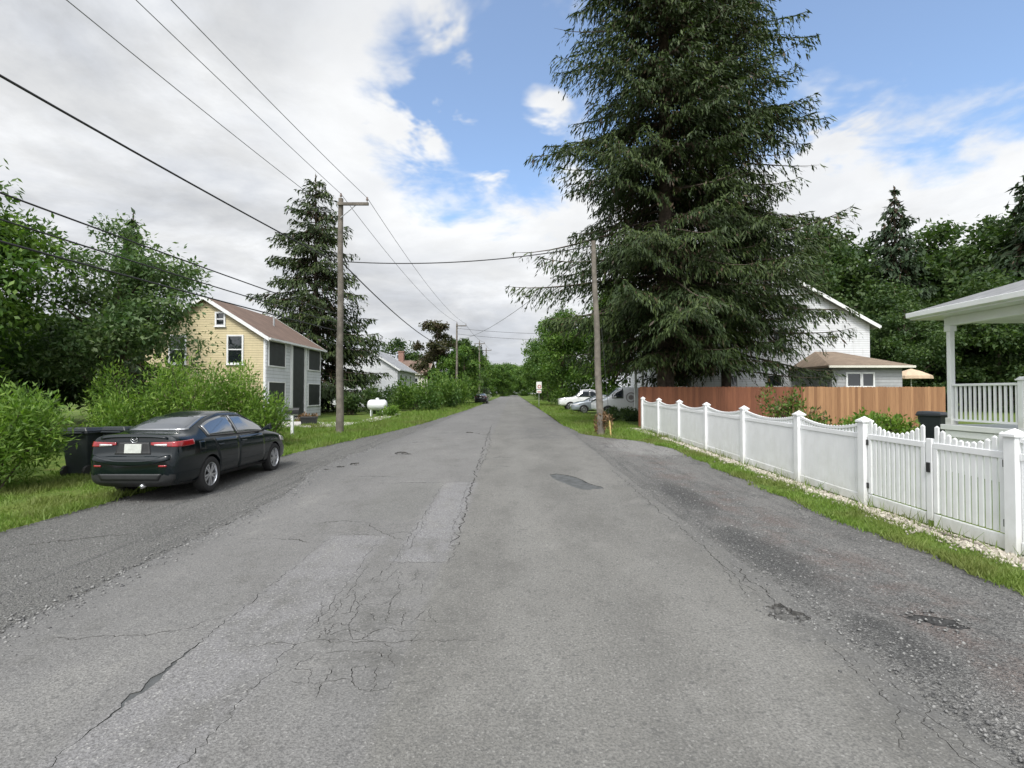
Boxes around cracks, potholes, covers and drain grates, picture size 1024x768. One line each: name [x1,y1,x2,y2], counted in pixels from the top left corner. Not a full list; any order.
pothole [766,603,811,623]
crack [610,469,1004,768]
crack [177,544,495,768]
pothole [903,615,970,630]
